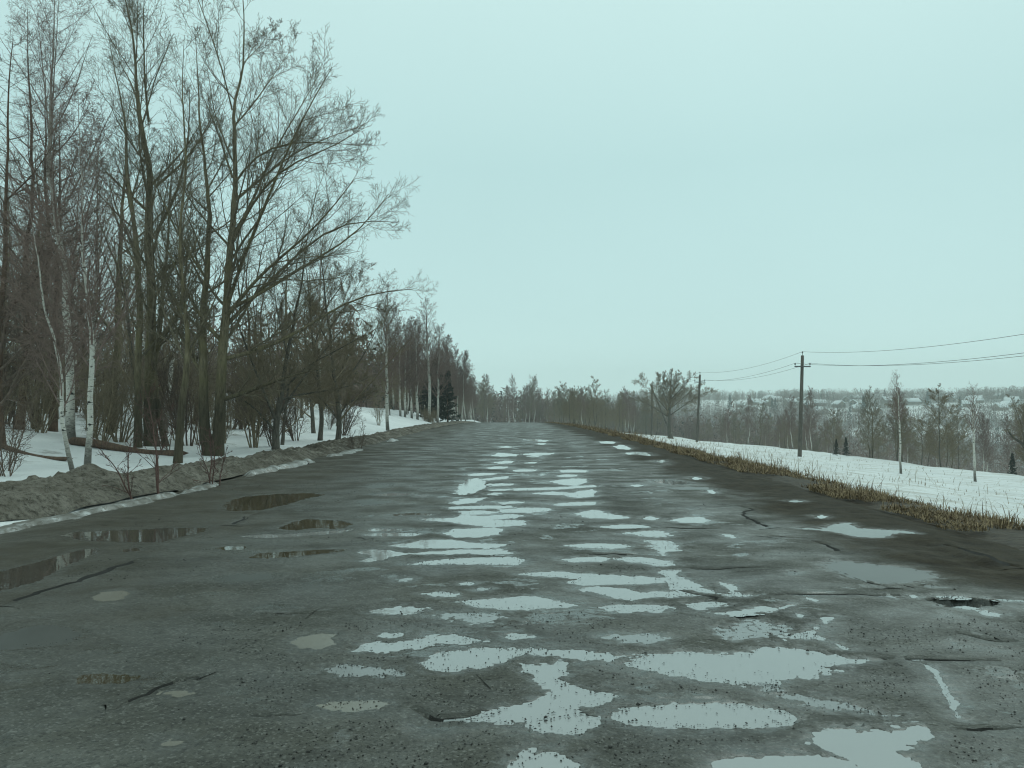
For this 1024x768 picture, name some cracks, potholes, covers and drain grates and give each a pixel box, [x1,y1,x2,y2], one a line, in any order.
crack [573,506,1024,603]
pothole [42,525,226,545]
pothole [0,545,116,595]
pothole [403,642,647,680]
pothole [226,546,361,562]
crack [874,629,1024,669]
